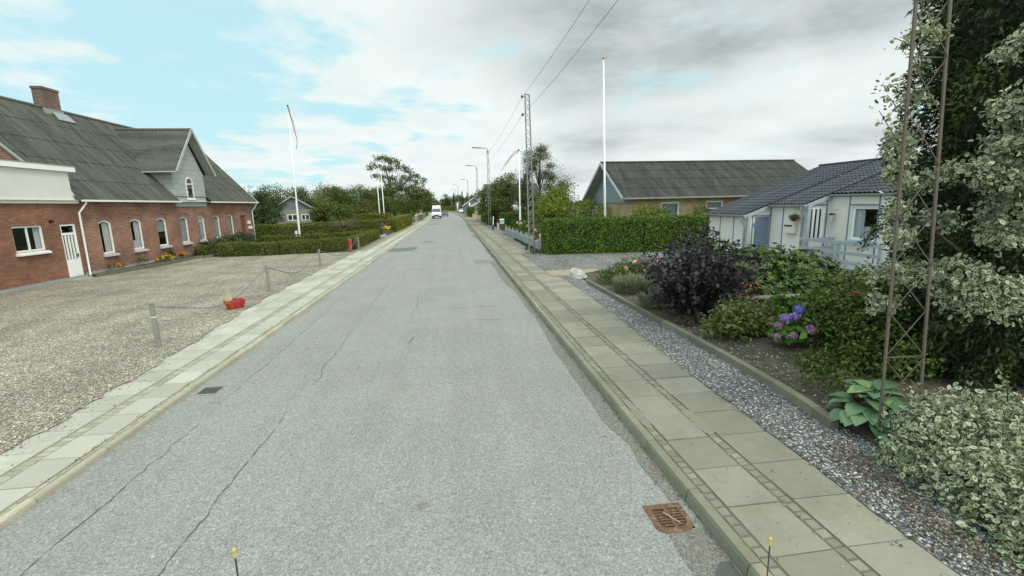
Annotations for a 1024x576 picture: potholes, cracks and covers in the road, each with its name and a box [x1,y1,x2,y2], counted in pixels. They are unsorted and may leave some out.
crack [20,310,329,576]
drain grate [193,386,225,396]
drain grate [642,502,695,534]
